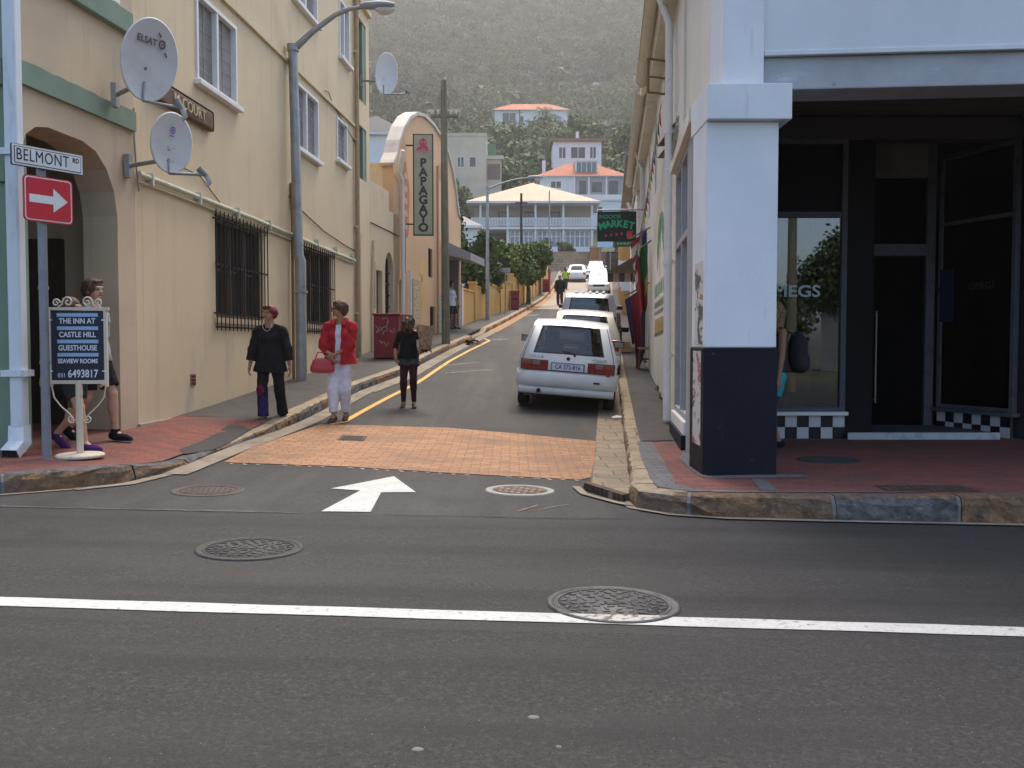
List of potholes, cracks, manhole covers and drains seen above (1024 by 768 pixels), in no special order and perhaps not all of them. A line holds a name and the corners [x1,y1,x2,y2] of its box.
manhole cover [170,485,245,497]
manhole cover [194,537,303,561]
manhole cover [796,456,861,464]
manhole cover [485,485,554,497]
manhole cover [547,586,681,625]
